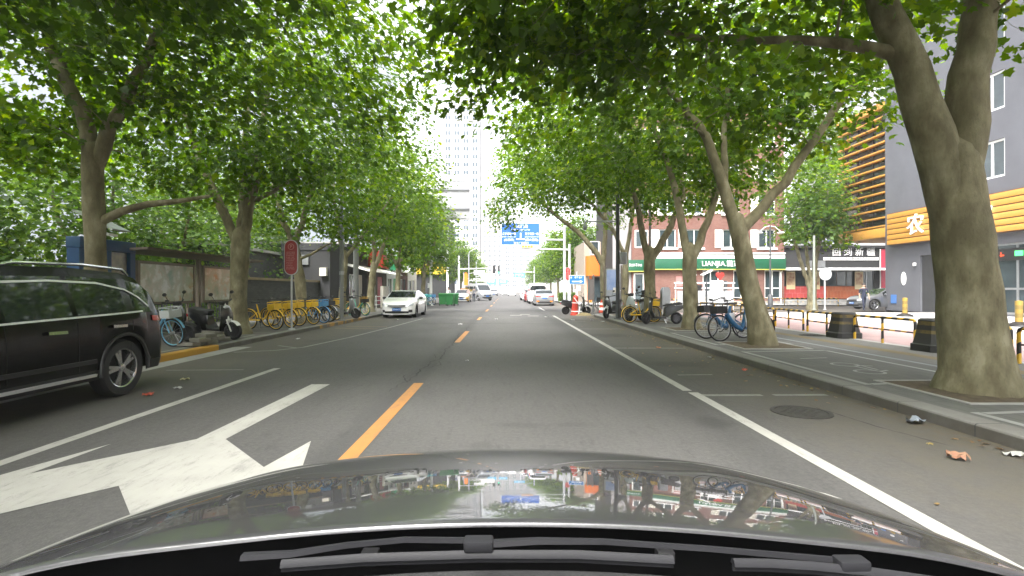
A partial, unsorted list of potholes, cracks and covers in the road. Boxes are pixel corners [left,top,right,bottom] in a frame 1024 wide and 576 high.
manhole cover [770,405,834,419]
crack [392,323,476,389]
